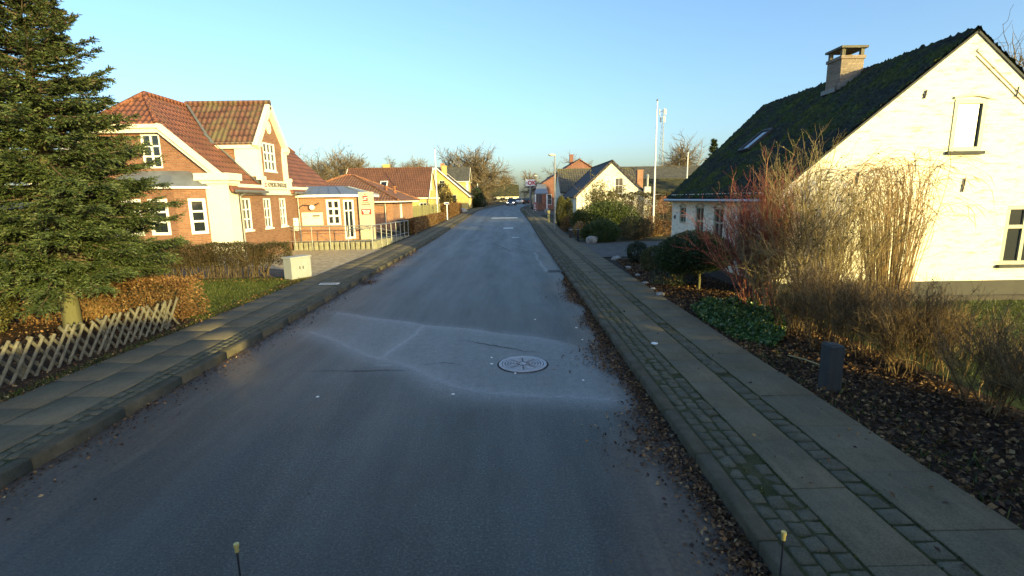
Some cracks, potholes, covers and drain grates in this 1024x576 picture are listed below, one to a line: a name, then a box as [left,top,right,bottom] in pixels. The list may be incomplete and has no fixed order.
manhole cover [497,356,549,373]
